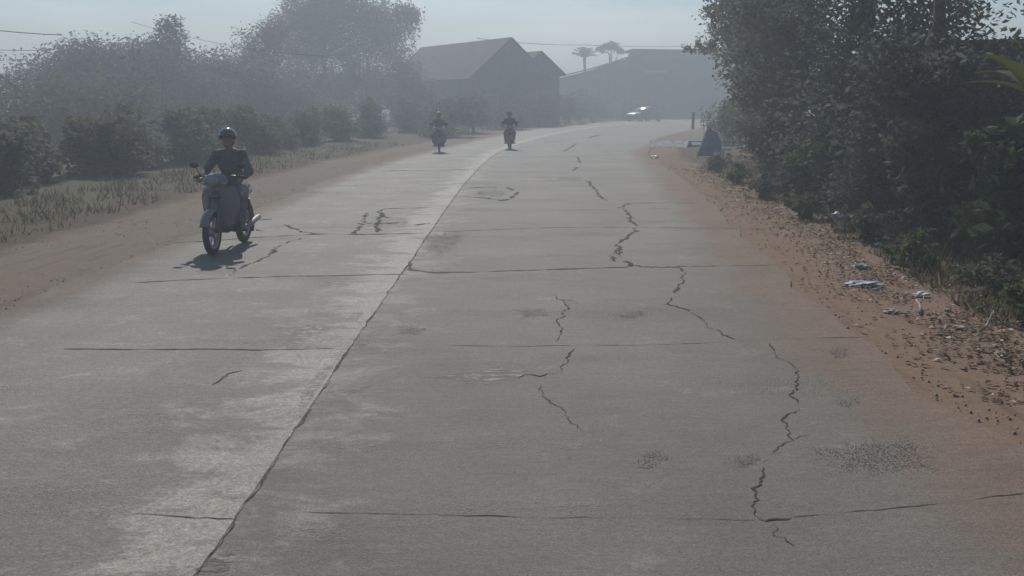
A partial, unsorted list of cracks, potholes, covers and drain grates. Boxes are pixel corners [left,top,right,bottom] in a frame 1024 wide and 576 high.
crack [563,134,747,342]
crack [751,343,806,546]
crack [351,207,427,234]
crack [465,187,519,201]
crack [516,296,583,433]
crack [229,219,317,275]
